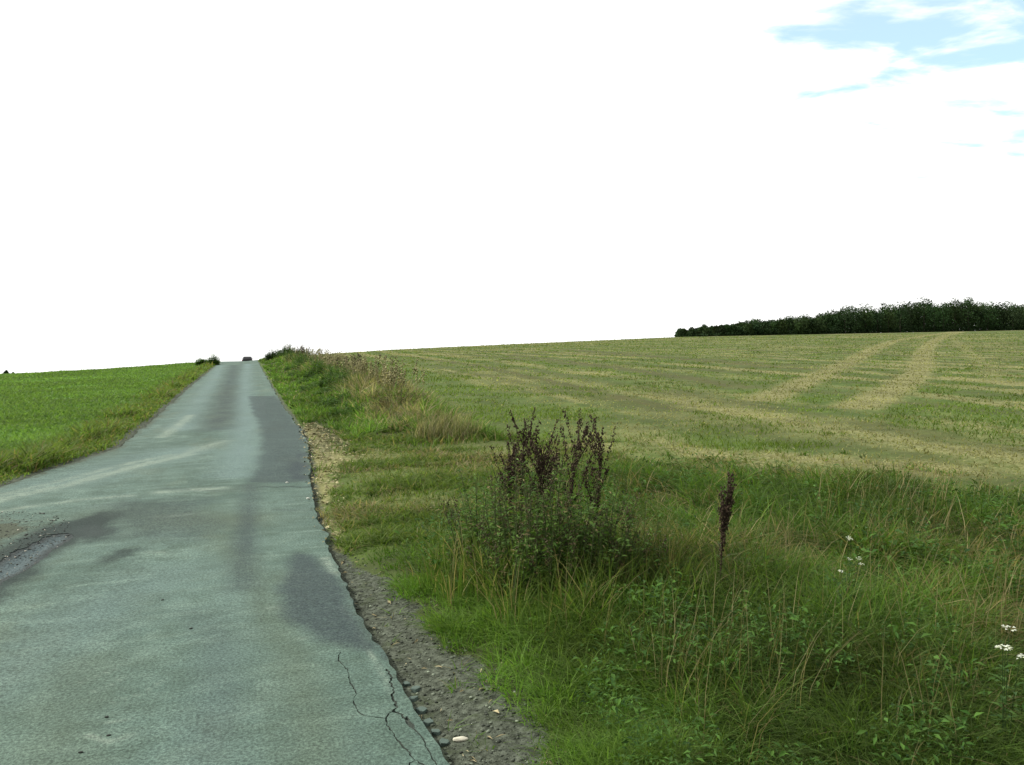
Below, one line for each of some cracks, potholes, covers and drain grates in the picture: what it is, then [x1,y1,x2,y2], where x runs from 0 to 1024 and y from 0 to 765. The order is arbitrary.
crack [338,652,437,765]
pothole [0,533,73,585]
